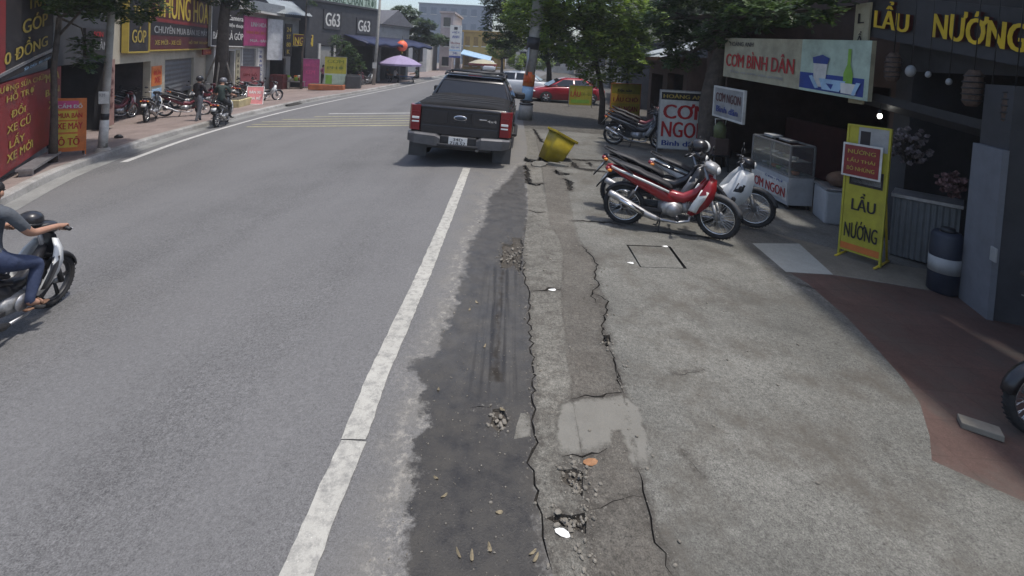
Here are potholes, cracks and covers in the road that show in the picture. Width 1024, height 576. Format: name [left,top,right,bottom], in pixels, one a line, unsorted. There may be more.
pothole [493,236,528,276]
pothole [486,404,509,437]
manhole cover [627,245,687,269]
pothole [555,460,589,507]
crack [590,470,672,575]
pothole [545,509,595,540]
crack [562,449,606,458]
crack [573,247,624,399]
